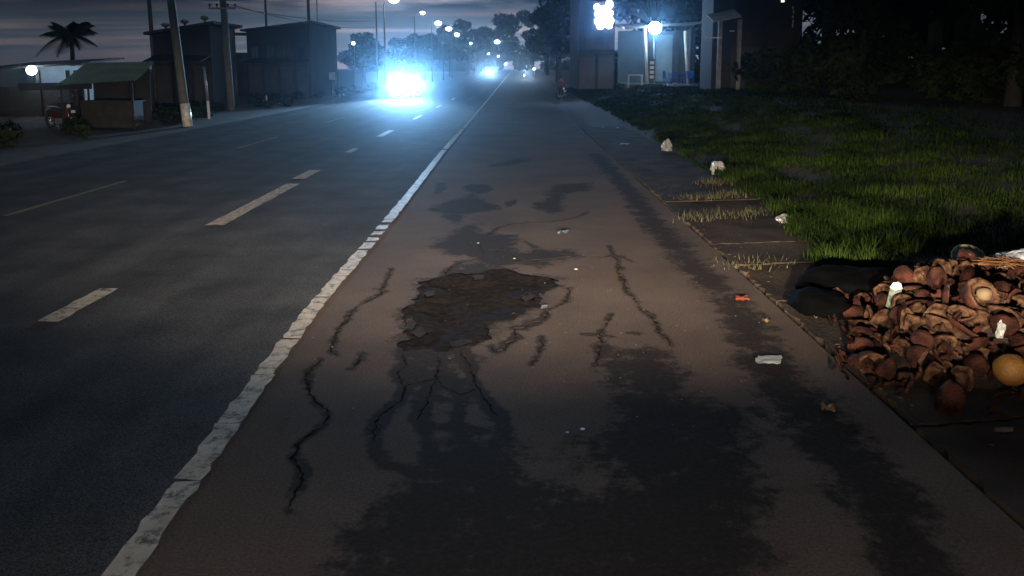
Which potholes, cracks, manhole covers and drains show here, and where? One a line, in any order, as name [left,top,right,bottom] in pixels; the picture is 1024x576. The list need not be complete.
crack [371,286,571,444]
crack [288,268,393,512]
pothole [397,268,560,353]
crack [445,213,671,364]
